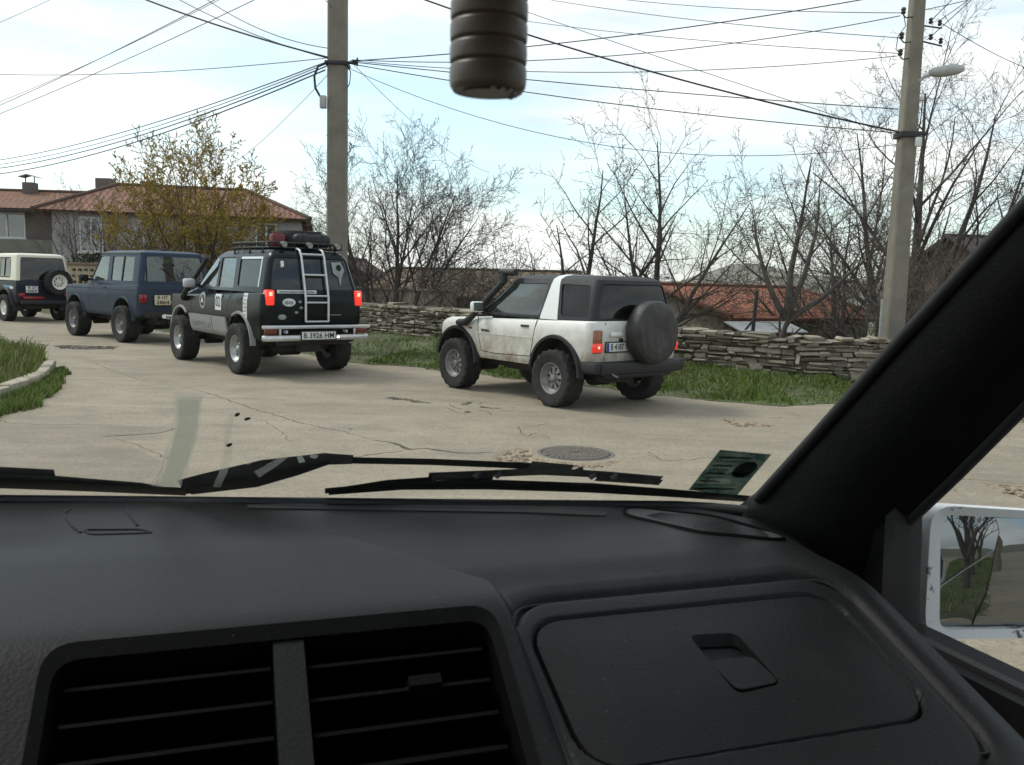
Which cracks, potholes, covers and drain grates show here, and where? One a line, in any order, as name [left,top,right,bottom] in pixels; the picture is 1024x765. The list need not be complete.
crack [111,437,173,462]
crack [183,386,485,457]
crack [444,402,552,440]
manhole cover [537,446,615,461]
